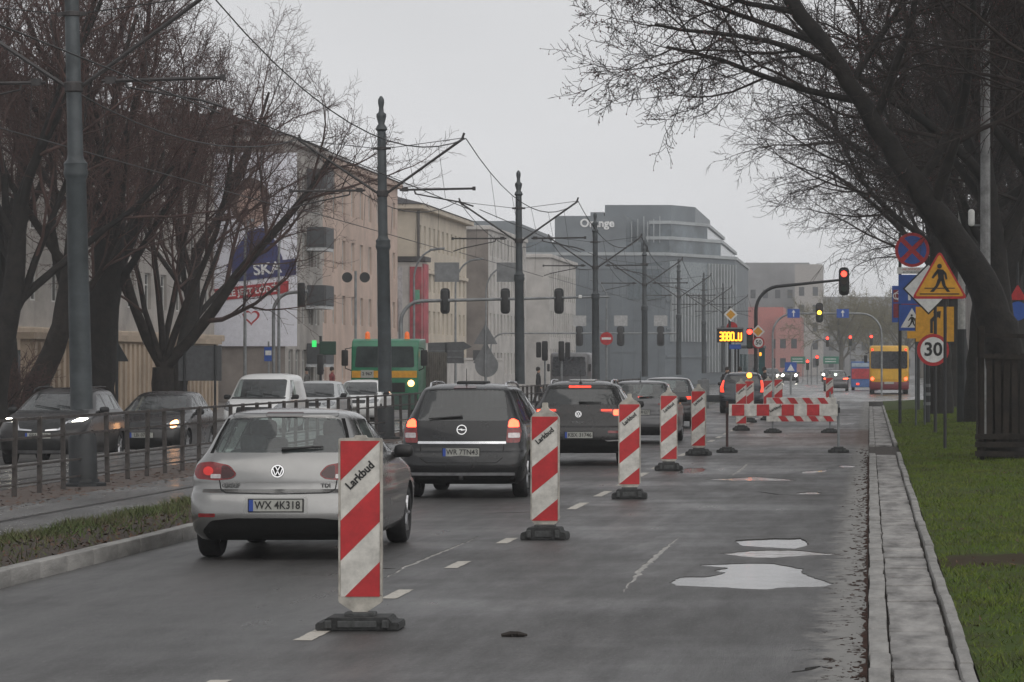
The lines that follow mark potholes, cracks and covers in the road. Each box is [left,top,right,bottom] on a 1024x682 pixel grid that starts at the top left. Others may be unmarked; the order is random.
pothole [721,550,835,558]
pothole [669,563,833,589]
pothole [735,538,809,549]
